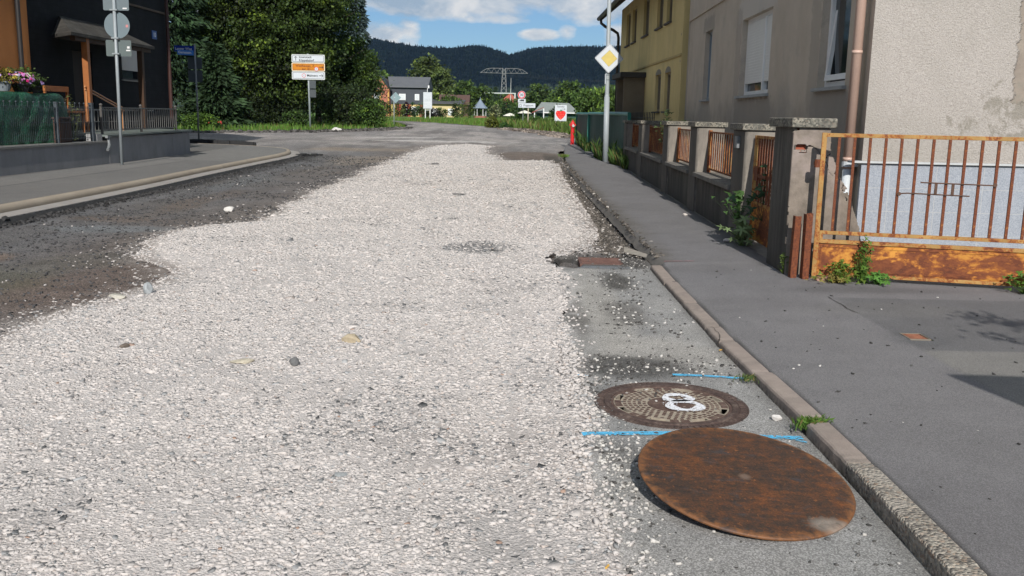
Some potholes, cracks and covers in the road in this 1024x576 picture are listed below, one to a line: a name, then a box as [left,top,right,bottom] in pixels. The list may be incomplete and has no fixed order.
pothole [554,257,579,266]
manhole cover [594,382,749,429]
drain grate [578,257,624,267]
utility cover [899,333,931,341]
